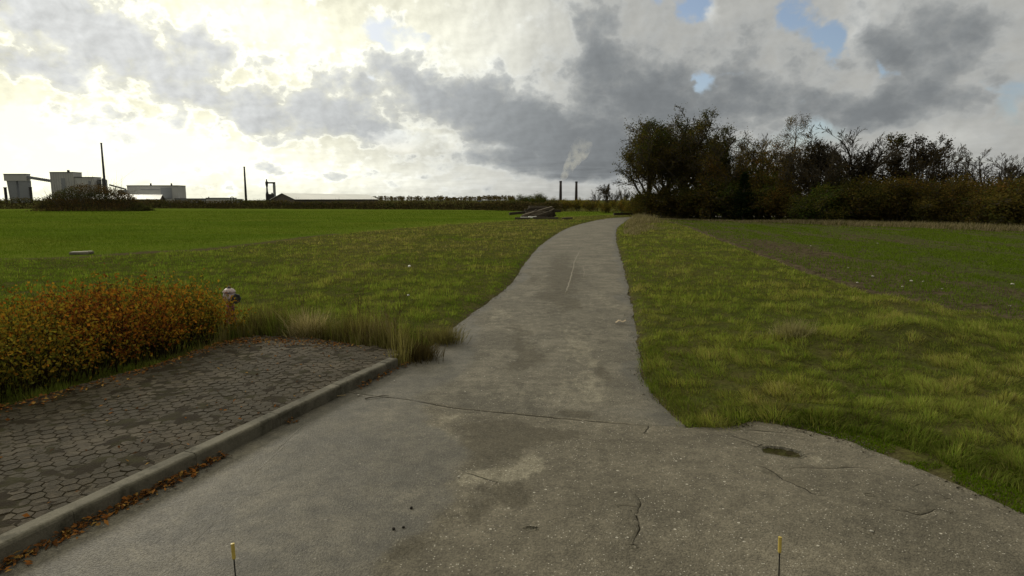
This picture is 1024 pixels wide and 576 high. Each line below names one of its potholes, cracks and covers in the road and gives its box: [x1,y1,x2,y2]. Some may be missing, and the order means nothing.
crack [462,471,499,485]
pothole [758,445,807,459]
crack [614,494,649,545]
crack [751,464,869,500]
crack [859,480,953,536]
crack [345,391,655,434]
crack [565,249,585,292]
